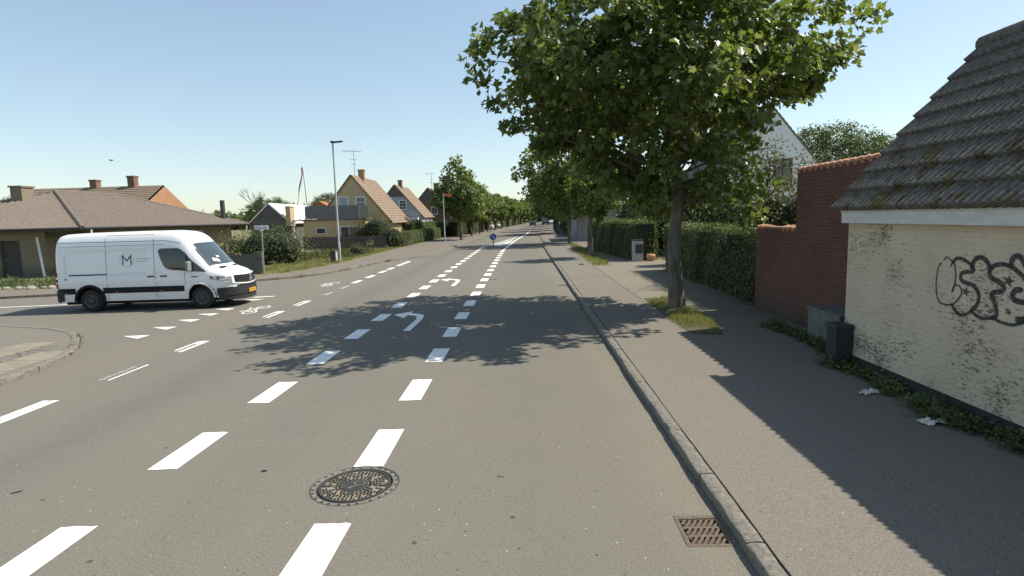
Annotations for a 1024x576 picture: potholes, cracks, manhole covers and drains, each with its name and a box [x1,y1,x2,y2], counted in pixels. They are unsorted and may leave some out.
drain grate [673,515,736,547]
manhole cover [309,466,400,507]
